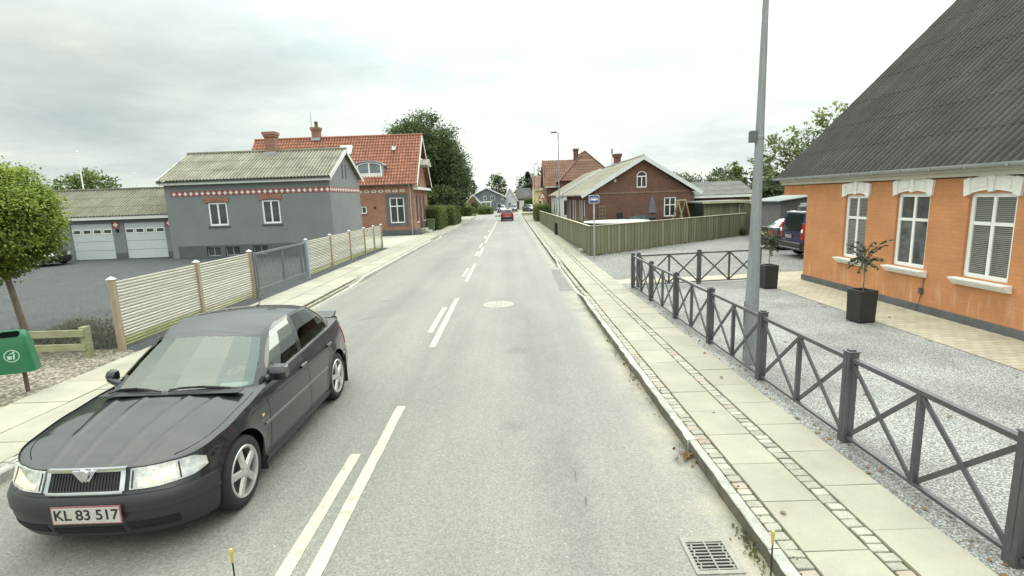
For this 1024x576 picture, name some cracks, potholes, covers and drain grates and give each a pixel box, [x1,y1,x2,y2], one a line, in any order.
drain grate [679,536,746,575]
